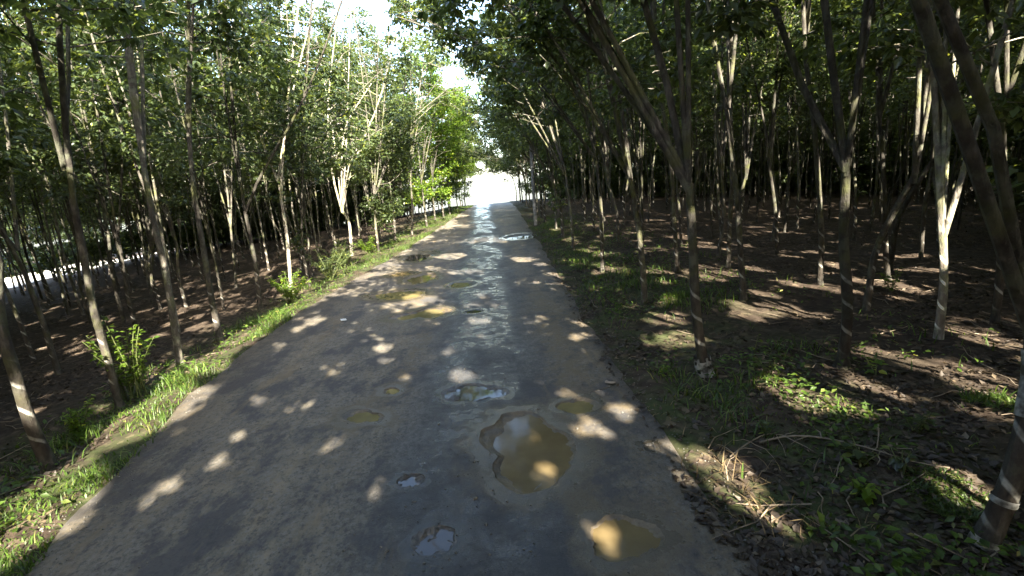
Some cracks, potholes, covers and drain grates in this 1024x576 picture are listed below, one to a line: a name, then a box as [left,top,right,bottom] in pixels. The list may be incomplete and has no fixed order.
pothole [590,514,665,562]
pothole [387,307,452,321]
pothole [555,397,602,414]
pothole [479,411,577,494]
pothole [410,525,457,556]
pothole [340,409,385,424]
pothole [402,272,439,284]
pothole [441,383,510,402]
pothole [446,280,477,288]
pothole [396,473,426,487]
pothole [368,289,427,300]
pothole [399,251,439,262]
